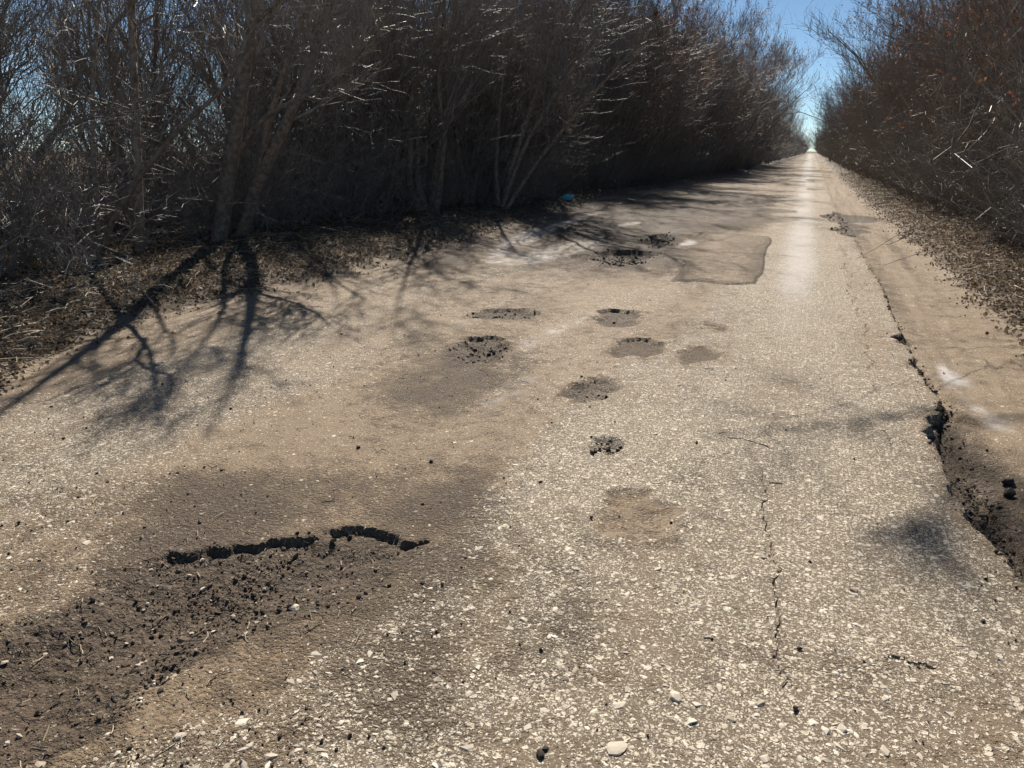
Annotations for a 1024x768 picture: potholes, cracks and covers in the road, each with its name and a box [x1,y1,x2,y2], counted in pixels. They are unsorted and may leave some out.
crack [884,652,937,672]
pothole [467,308,541,320]
